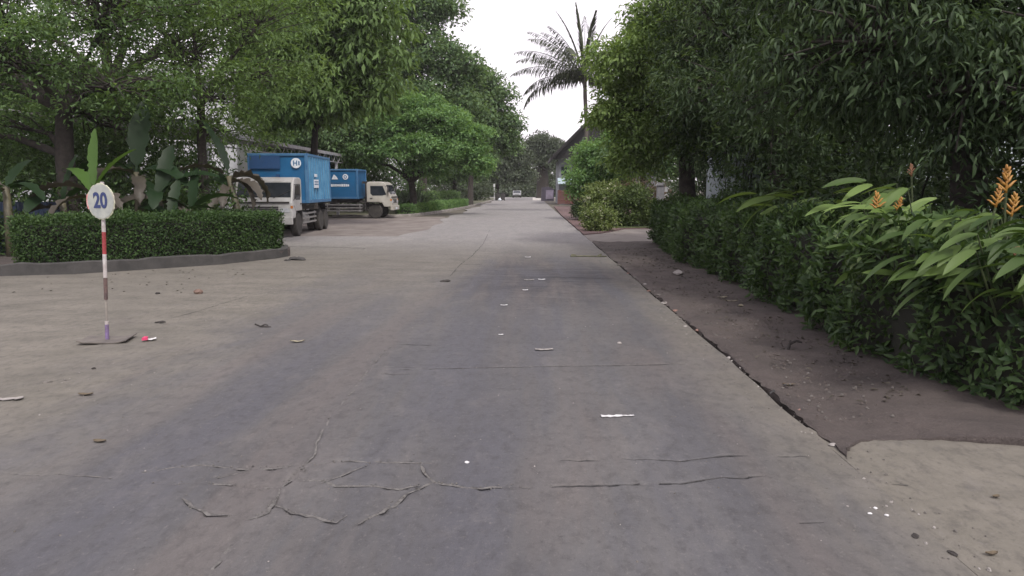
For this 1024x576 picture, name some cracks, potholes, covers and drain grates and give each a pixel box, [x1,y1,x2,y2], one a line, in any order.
crack [556,455,761,487]
crack [141,457,542,525]
